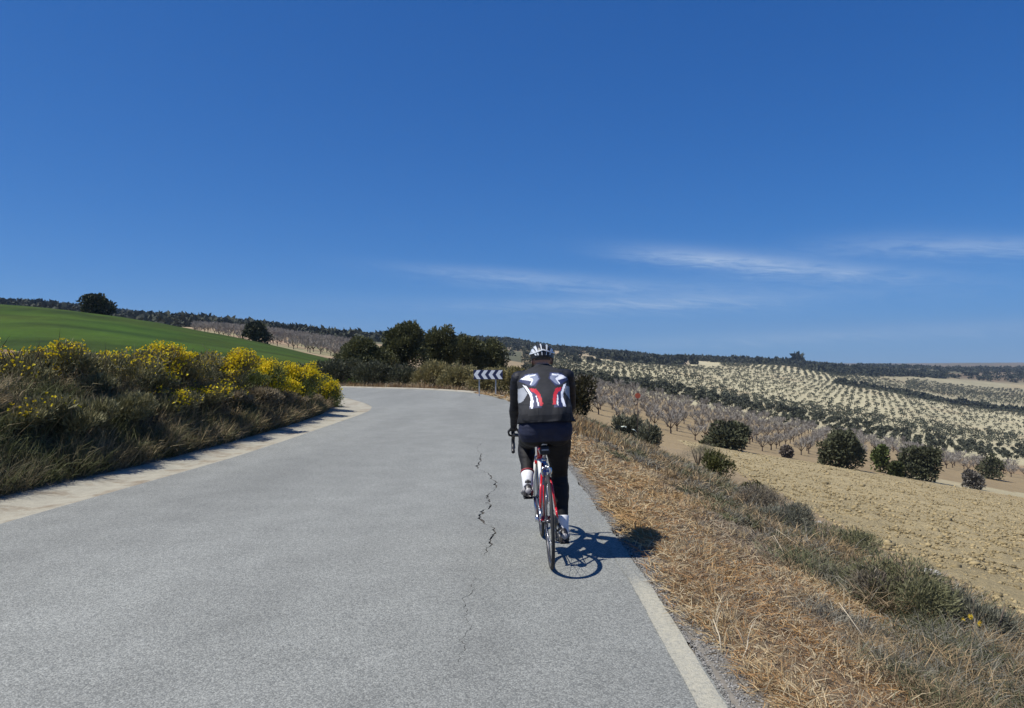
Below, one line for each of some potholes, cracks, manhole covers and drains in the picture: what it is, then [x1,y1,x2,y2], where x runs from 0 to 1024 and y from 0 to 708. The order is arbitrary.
crack [476,454,497,554]
